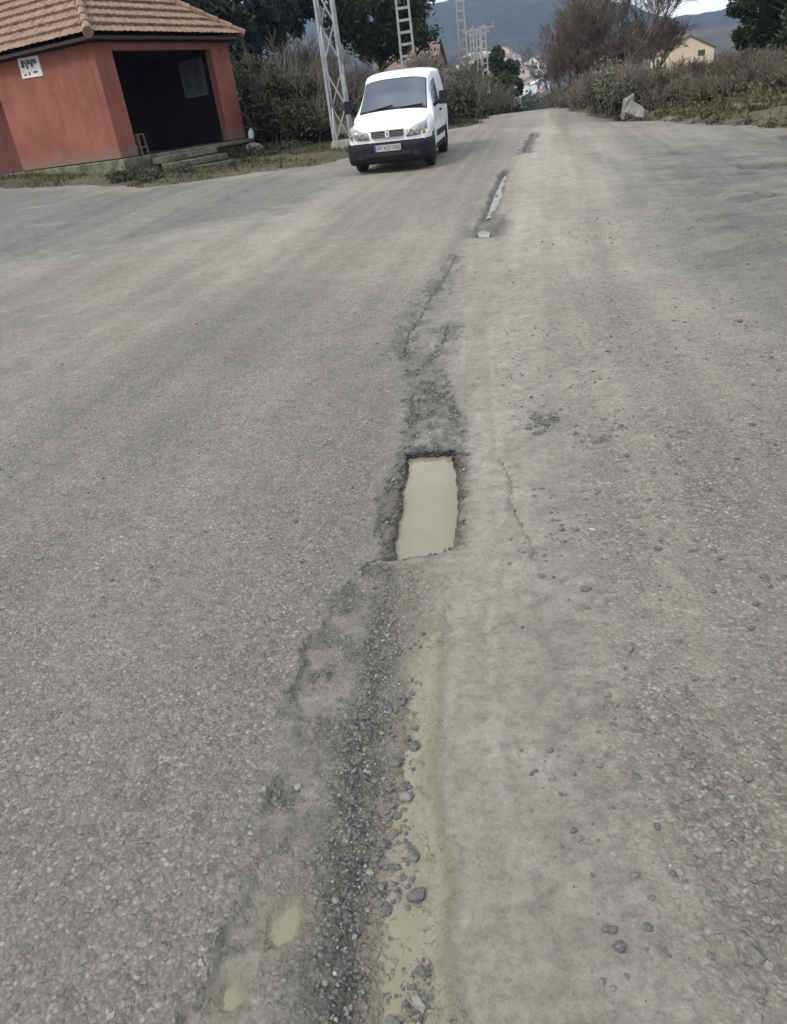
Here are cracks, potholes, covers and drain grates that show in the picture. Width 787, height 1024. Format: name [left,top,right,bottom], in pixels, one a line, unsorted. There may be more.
crack [402,258,456,373]
pothole [516,132,540,155]
crack [499,459,536,558]
pothole [175,560,472,1024]
pothole [371,341,475,562]
pothole [473,170,510,238]
